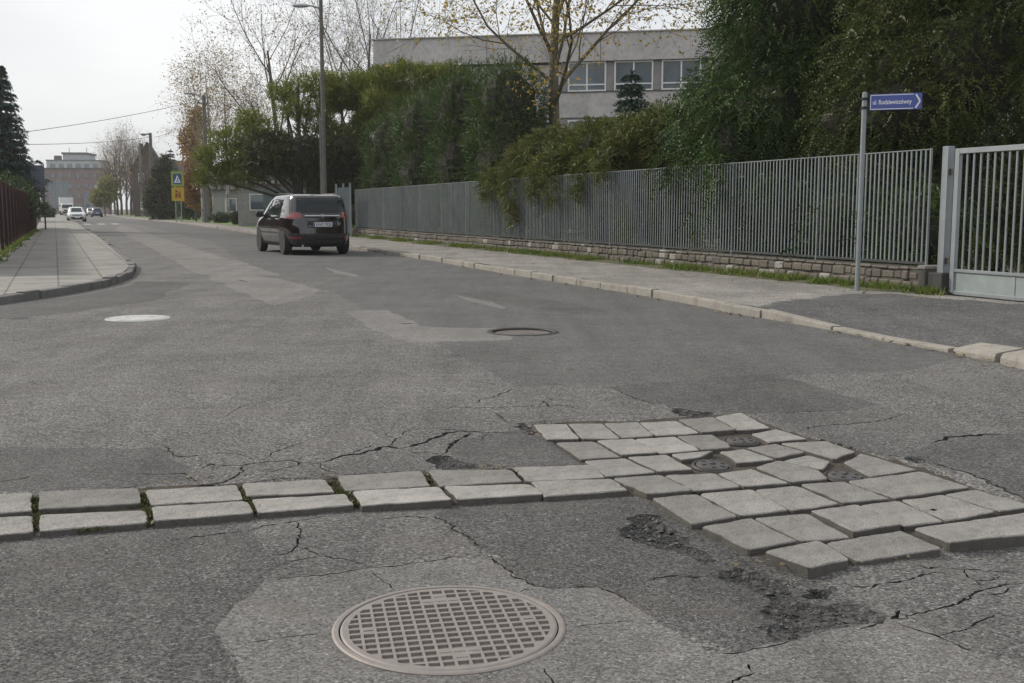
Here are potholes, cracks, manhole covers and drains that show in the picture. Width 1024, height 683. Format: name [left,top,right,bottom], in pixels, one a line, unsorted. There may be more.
crack [845,565,1021,654]
pothole [617,514,716,564]
utility cover [823,470,866,484]
crack [252,516,392,588]
pothole [425,455,480,470]
pothole [718,568,886,643]
utility cover [691,459,733,473]
utility cover [722,436,760,447]
crack [385,516,486,552]
crack [141,390,573,487]
manhole cover [486,327,559,336]
pothole [515,423,538,435]
